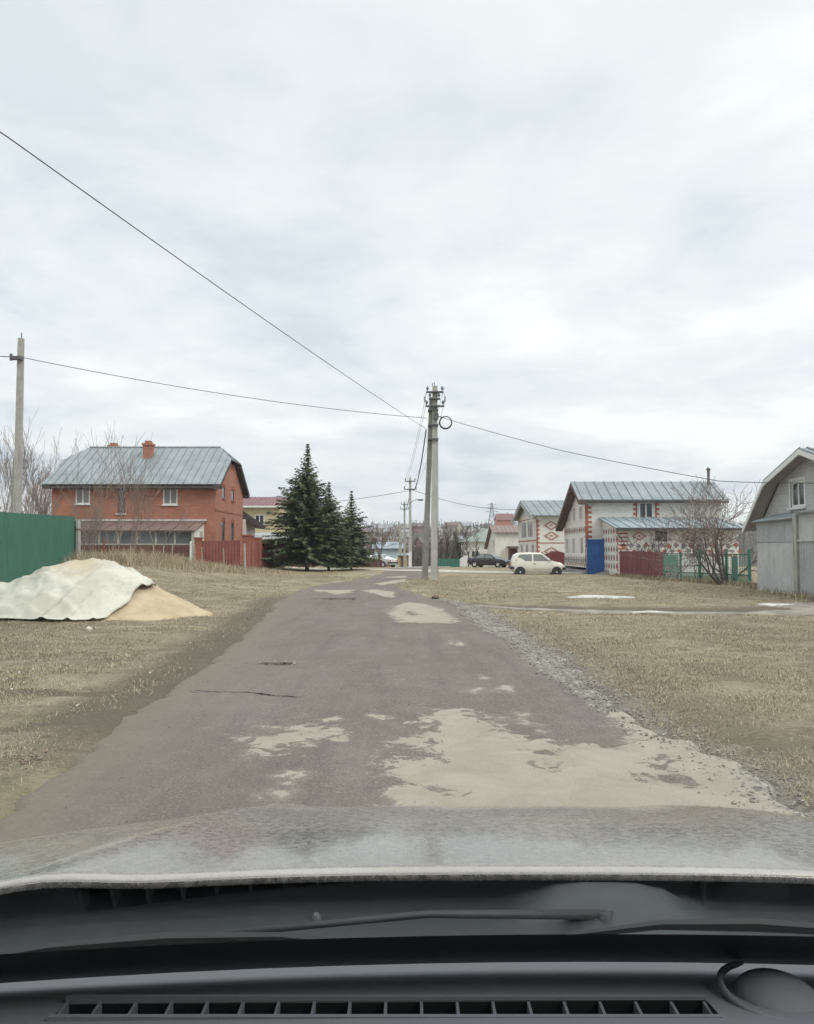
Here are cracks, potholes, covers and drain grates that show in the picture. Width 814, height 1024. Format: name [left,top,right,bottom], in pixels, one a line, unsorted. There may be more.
crack [192,689,300,698]
